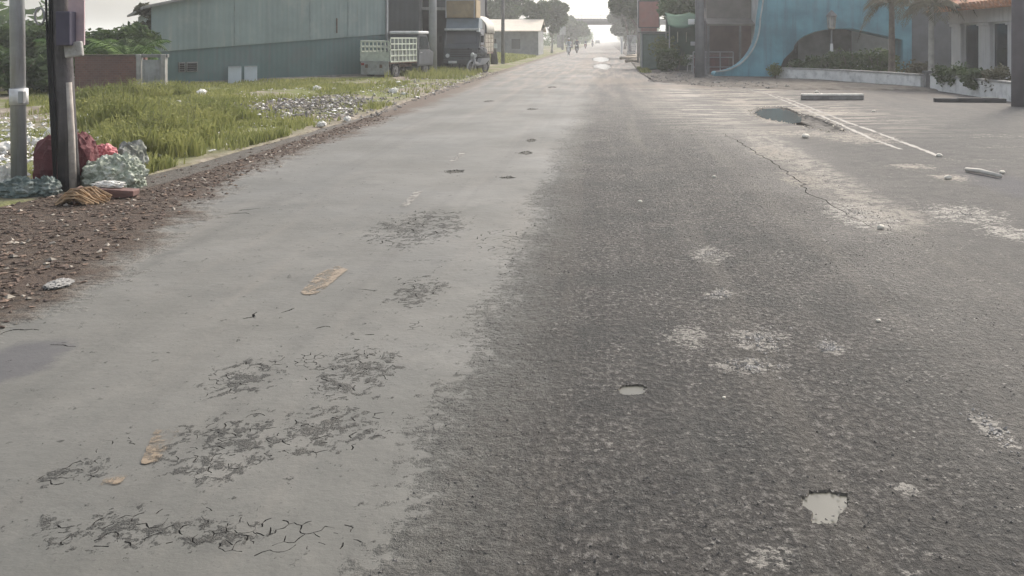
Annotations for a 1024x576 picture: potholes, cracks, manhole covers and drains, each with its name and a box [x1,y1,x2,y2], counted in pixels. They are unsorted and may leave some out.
crack [174,334,394,480]
crack [398,278,438,330]
crack [366,211,517,251]
crack [57,507,361,556]
pothole [747,106,846,133]
crack [725,135,873,228]
pothole [798,487,858,525]
pothole [615,383,650,395]
